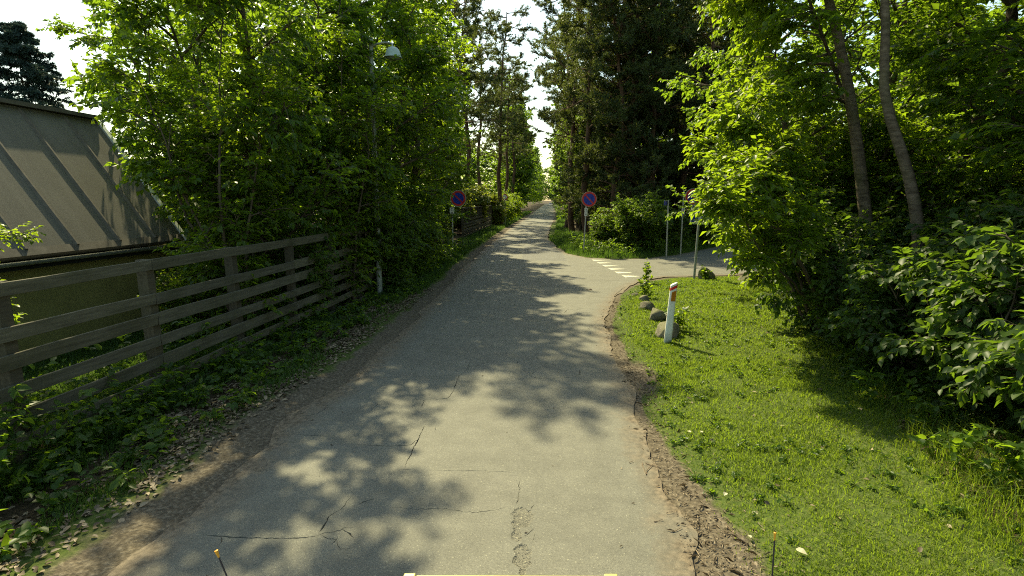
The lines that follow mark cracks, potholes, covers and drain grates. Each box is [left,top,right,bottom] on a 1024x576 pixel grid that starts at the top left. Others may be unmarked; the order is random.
crack [362,427,424,470]
crack [202,482,534,549]
pothole [512,543,532,576]
pothole [510,506,534,542]
